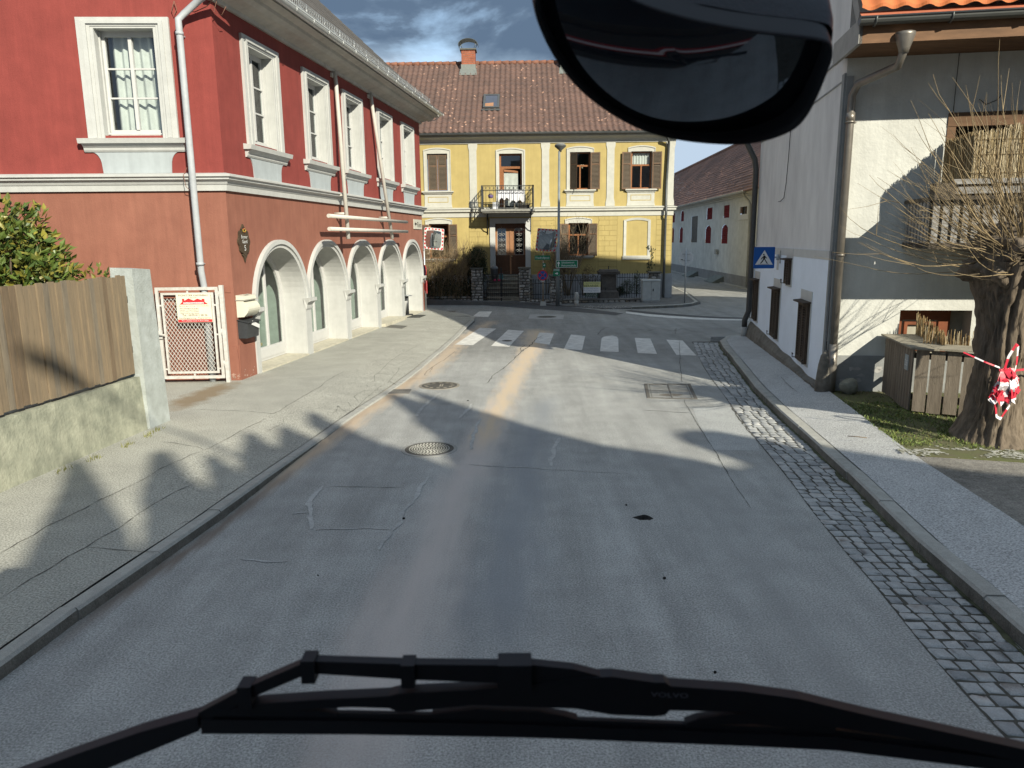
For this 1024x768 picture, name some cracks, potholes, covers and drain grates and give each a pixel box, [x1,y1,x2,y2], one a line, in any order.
crack [548,438,560,466]
manhole cover [401,441,457,457]
manhole cover [419,382,460,390]
crack [336,336,541,415]
crack [292,476,429,550]
